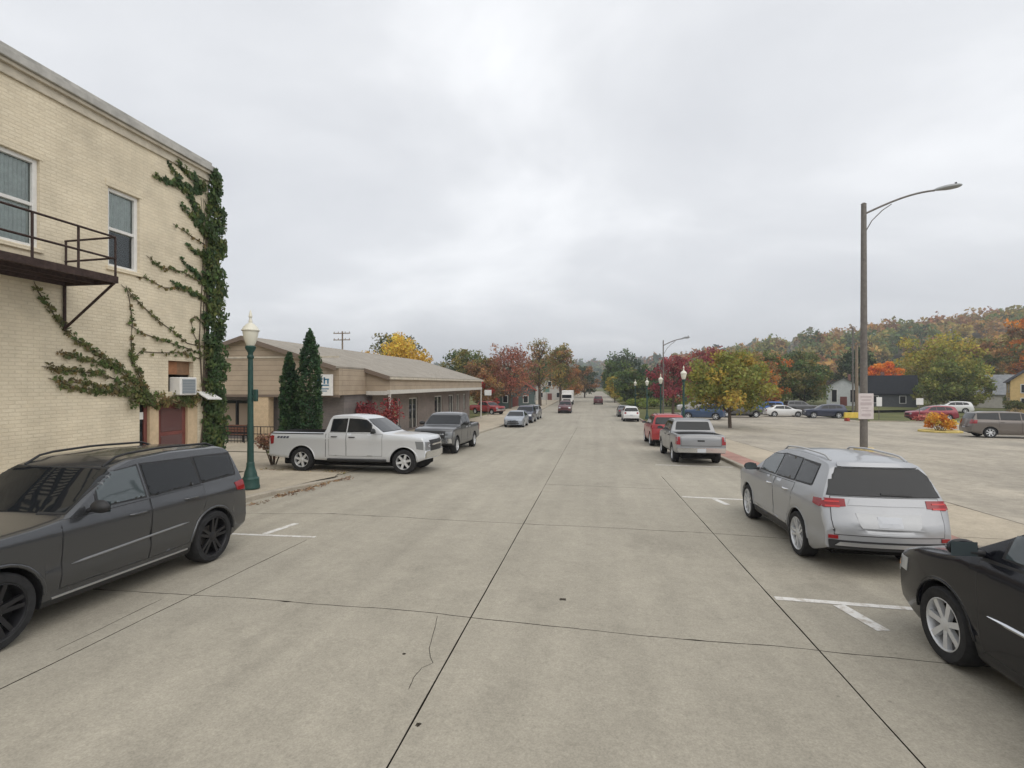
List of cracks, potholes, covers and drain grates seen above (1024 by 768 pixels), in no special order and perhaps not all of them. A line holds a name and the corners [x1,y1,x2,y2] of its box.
crack [93,589,990,667]
